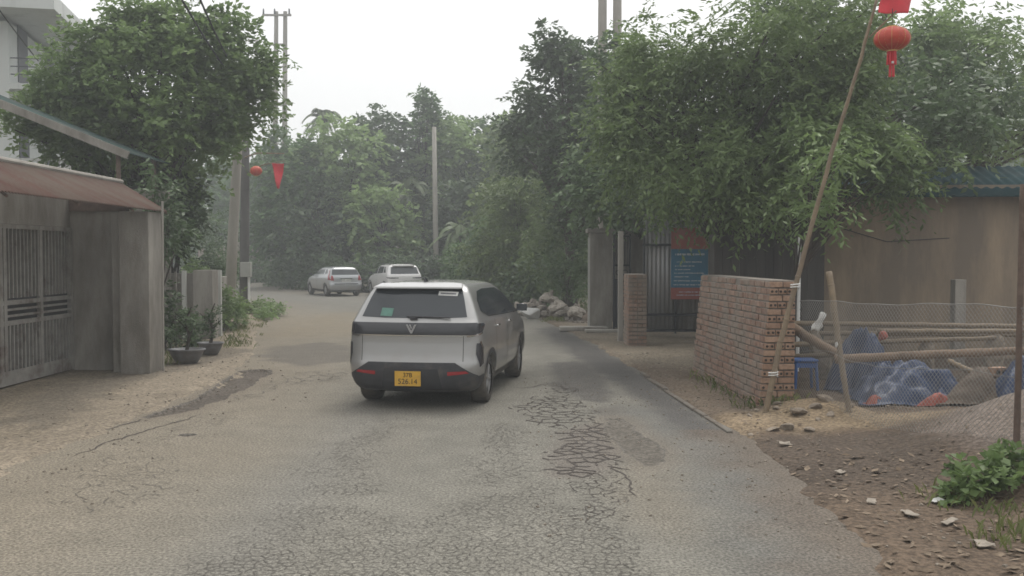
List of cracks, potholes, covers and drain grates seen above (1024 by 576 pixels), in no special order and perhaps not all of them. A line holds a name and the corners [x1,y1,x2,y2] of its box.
crack [172,384,652,576]
crack [48,408,245,513]
